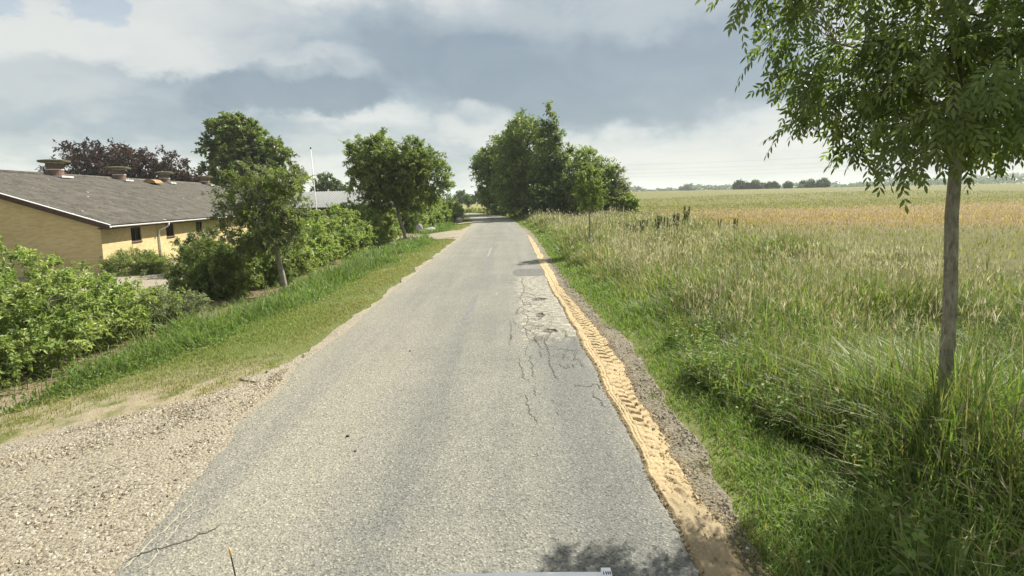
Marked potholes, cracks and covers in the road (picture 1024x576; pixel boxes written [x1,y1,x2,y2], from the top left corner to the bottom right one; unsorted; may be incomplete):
crack [509,283,586,430]
crack [118,497,221,572]
